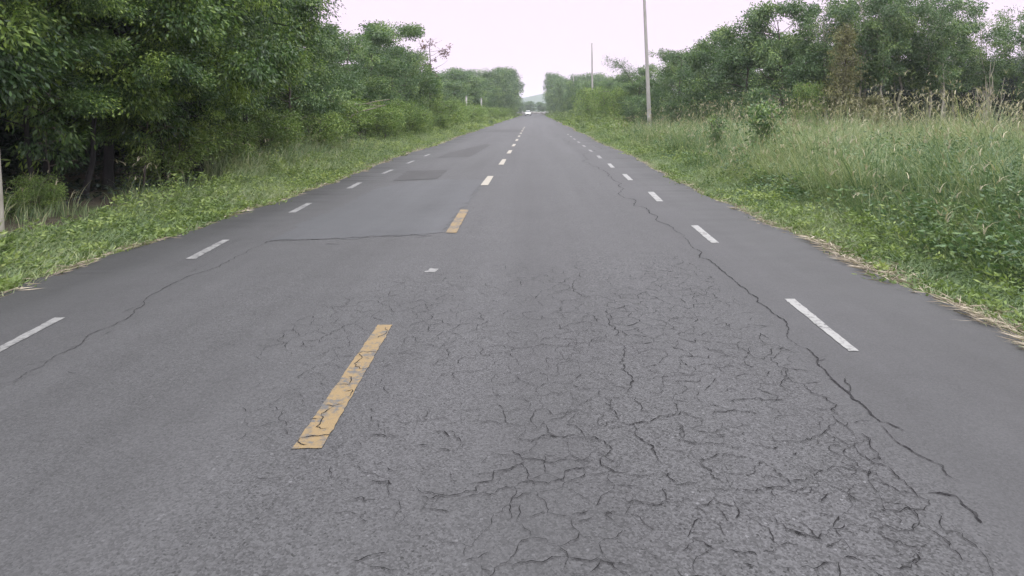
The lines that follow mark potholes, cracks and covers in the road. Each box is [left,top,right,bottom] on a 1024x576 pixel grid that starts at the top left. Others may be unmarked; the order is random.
crack [2,234,432,384]
crack [240,139,993,576]
